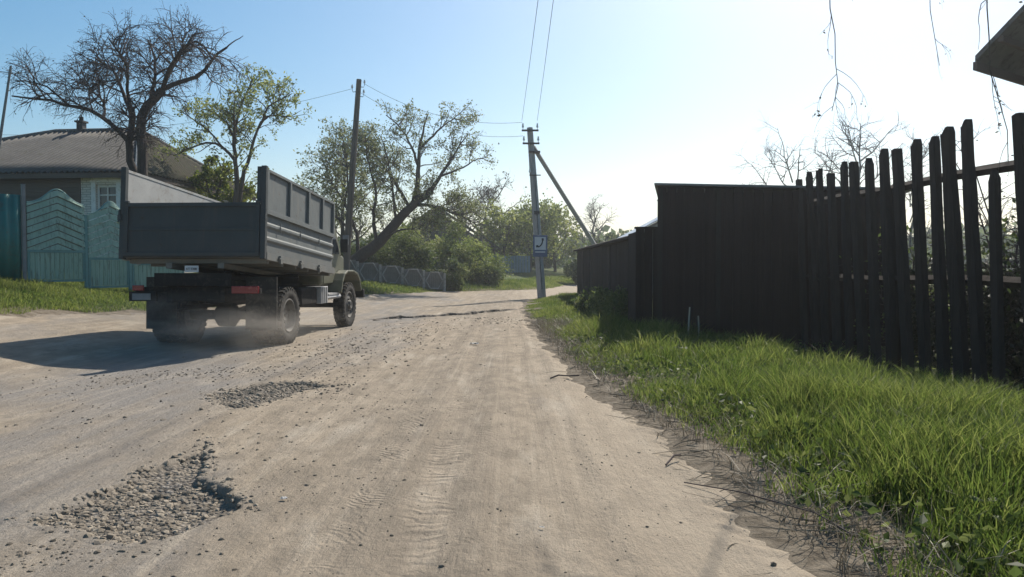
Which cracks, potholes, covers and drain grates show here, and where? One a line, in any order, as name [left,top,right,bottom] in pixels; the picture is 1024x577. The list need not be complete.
crack [369,309,525,320]
pothole [199,380,335,410]
pothole [4,437,258,549]
